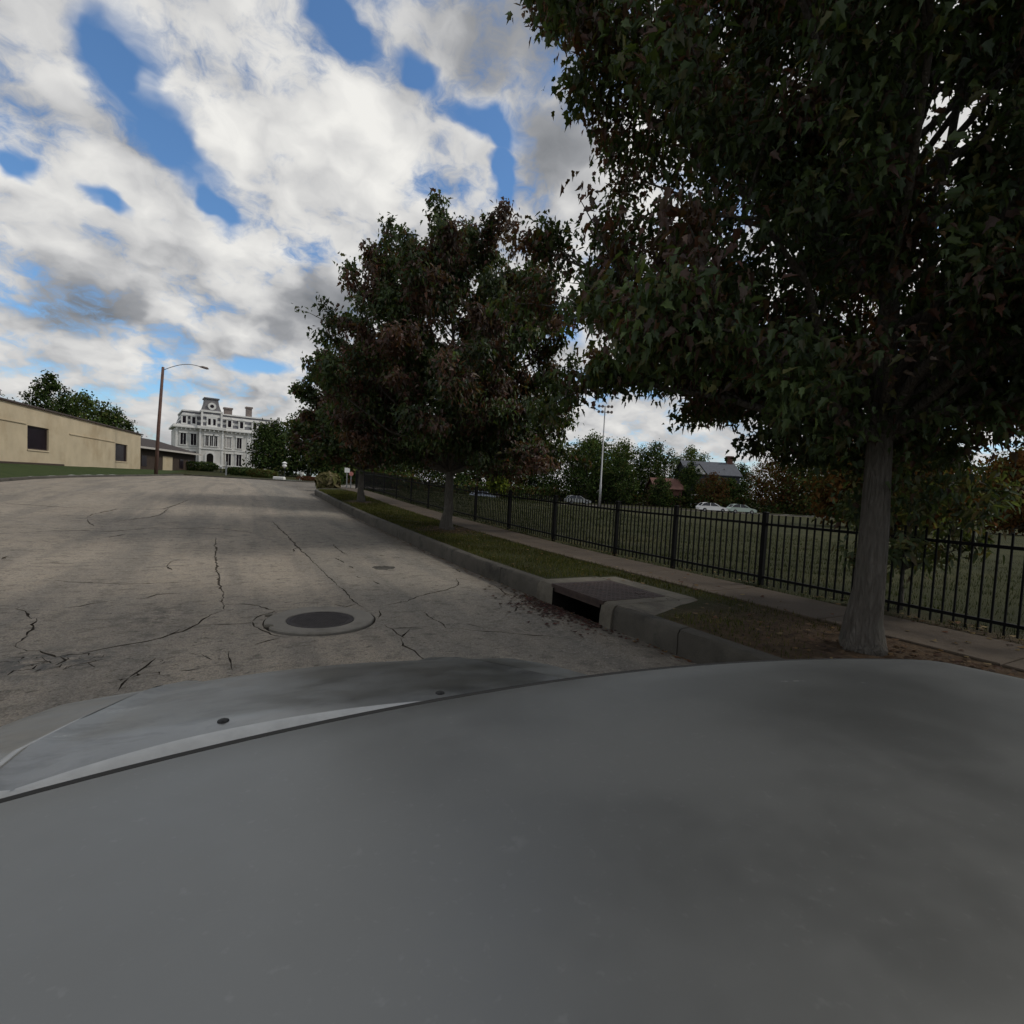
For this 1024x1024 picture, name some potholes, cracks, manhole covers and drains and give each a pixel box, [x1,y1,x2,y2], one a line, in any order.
crack [272,521,383,607]
manhole cover [262,606,376,636]
crack [0,500,277,691]
crack [378,567,574,659]
drain grate [536,577,697,629]
